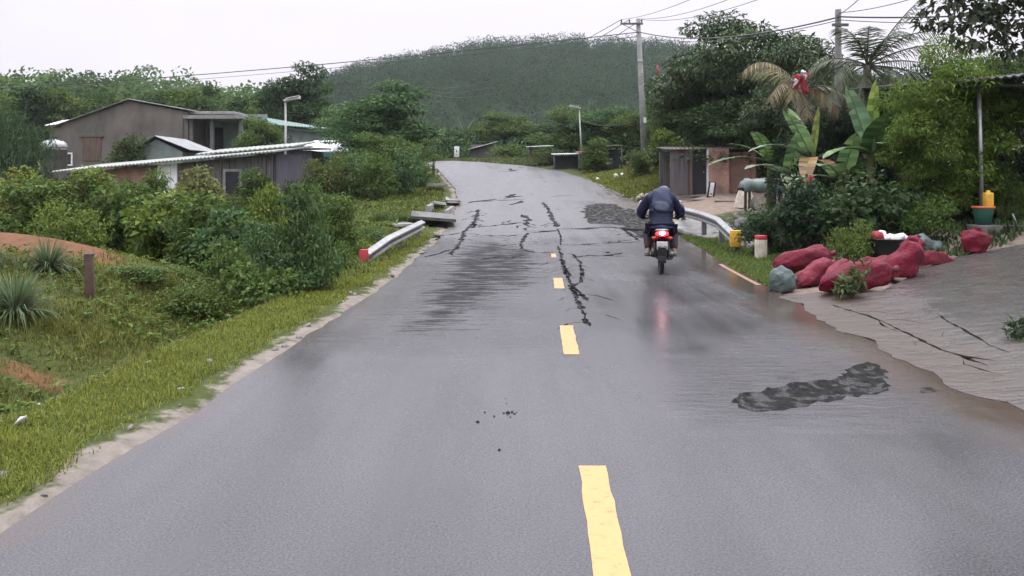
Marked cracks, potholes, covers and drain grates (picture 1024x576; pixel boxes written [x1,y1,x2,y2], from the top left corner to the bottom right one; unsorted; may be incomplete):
crack [419,194,623,329]
crack [833,305,1007,375]
